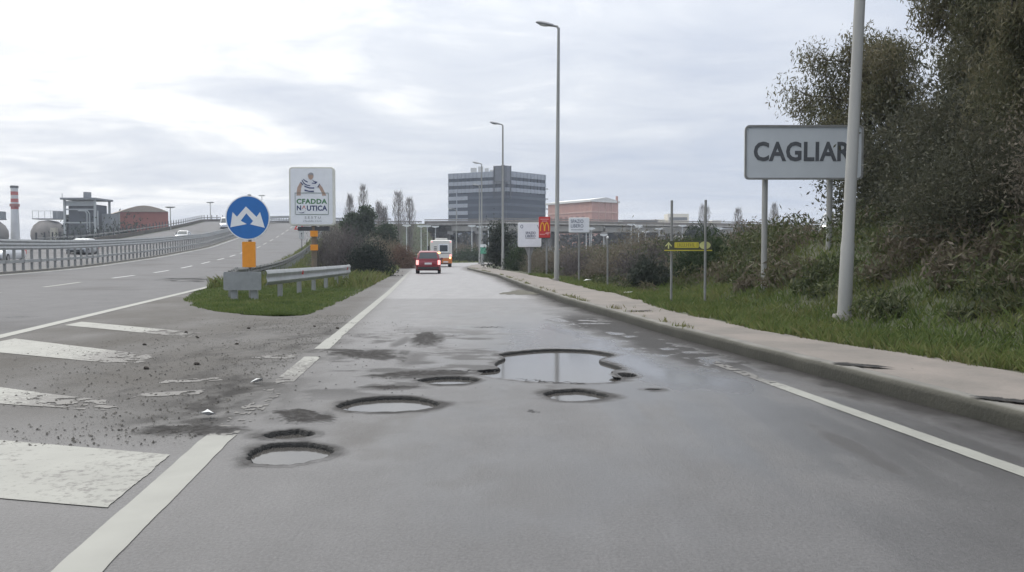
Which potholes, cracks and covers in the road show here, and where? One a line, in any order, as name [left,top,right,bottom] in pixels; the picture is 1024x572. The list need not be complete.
pothole [536,388,616,402]
pothole [472,348,627,384]
pothole [411,376,486,385]
pothole [328,395,448,413]
pothole [236,440,344,467]
pothole [253,427,324,441]
